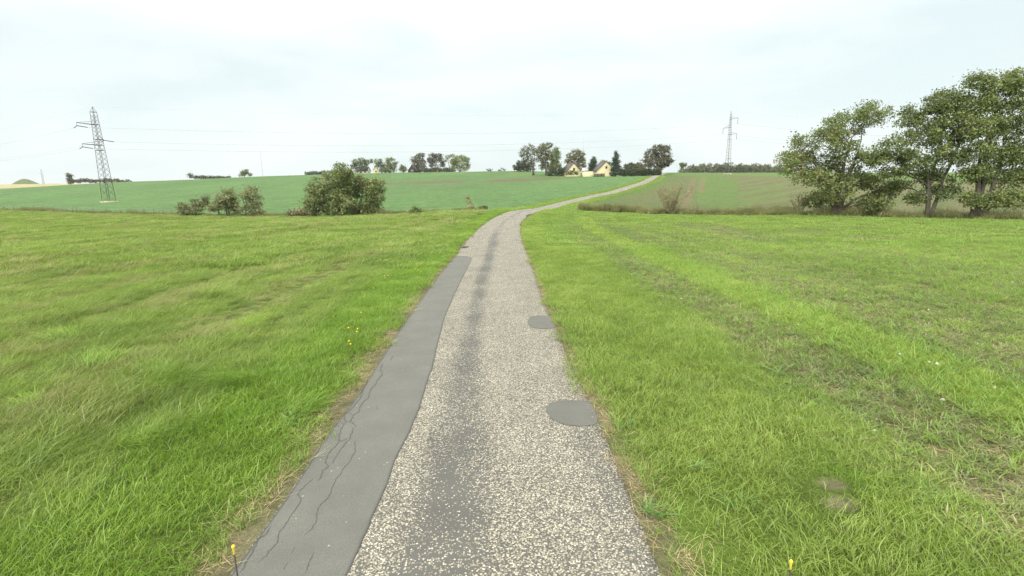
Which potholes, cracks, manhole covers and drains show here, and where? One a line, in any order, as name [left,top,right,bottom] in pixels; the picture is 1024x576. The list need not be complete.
crack [243,355,393,568]
